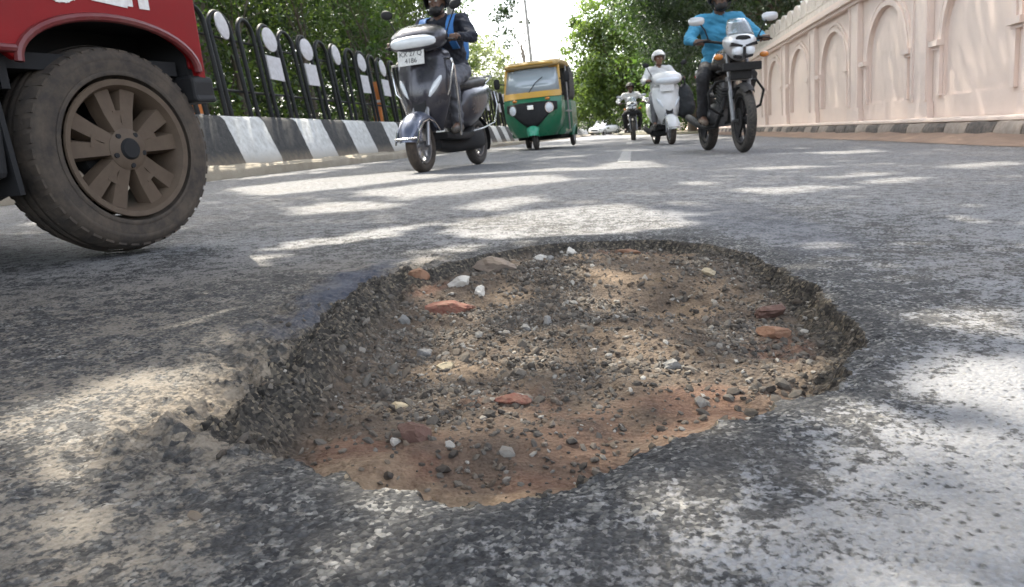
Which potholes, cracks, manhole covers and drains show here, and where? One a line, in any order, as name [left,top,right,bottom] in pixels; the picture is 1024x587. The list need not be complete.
pothole [199,239,871,509]
